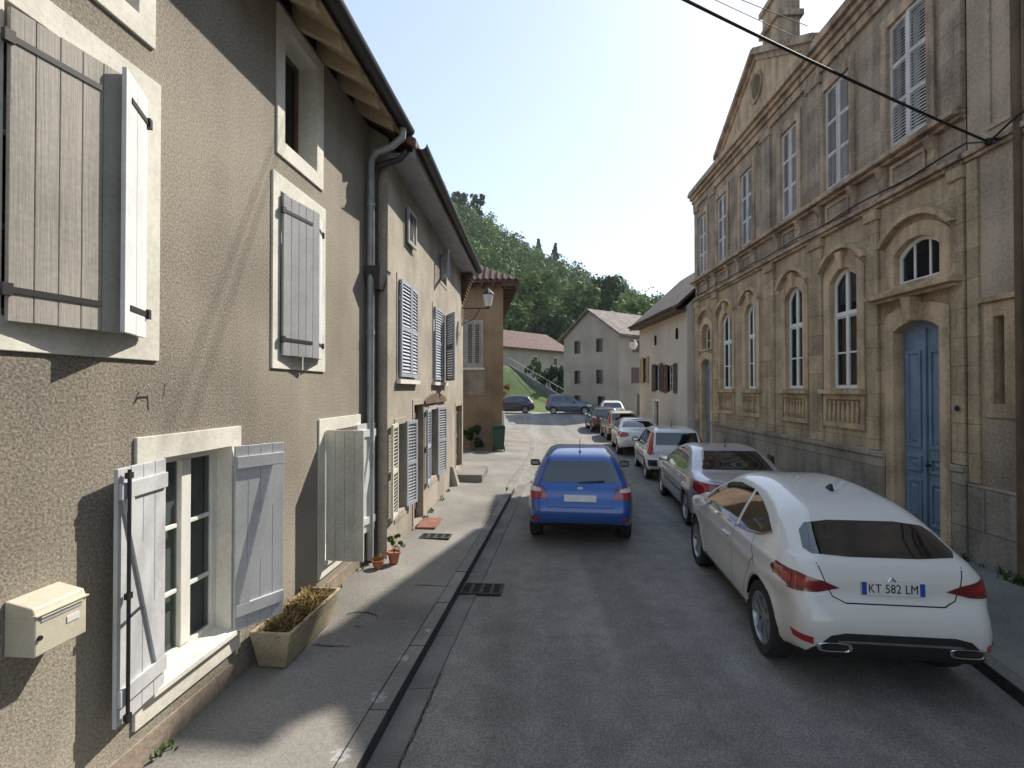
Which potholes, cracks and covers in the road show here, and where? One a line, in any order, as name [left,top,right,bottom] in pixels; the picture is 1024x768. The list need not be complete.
drain grate [460,582,504,596]
